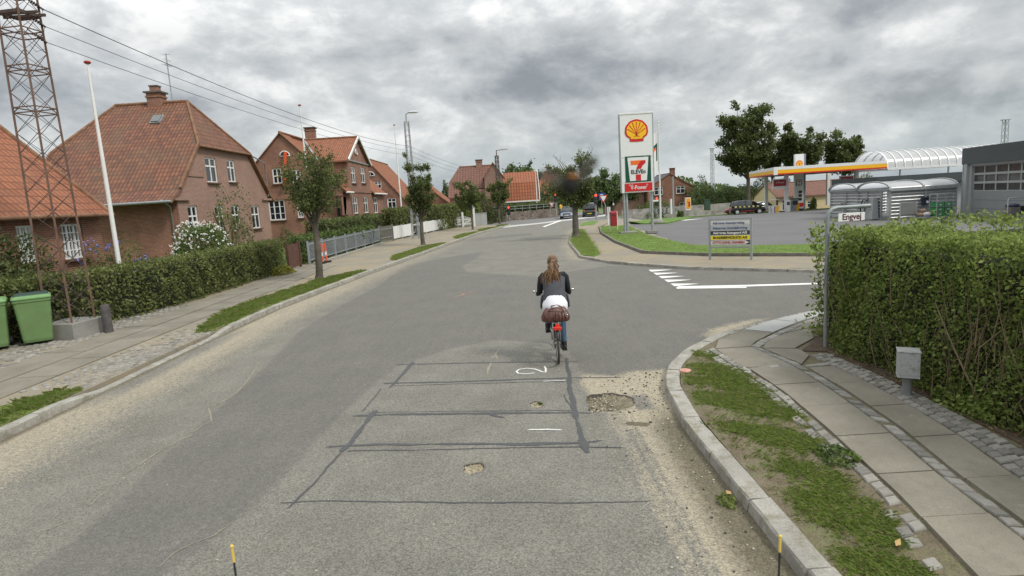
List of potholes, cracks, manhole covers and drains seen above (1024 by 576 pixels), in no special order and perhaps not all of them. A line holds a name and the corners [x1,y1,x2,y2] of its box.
pothole [526,400,546,409]
pothole [582,392,639,414]
crack [160,525,228,566]
pothole [459,461,489,477]
